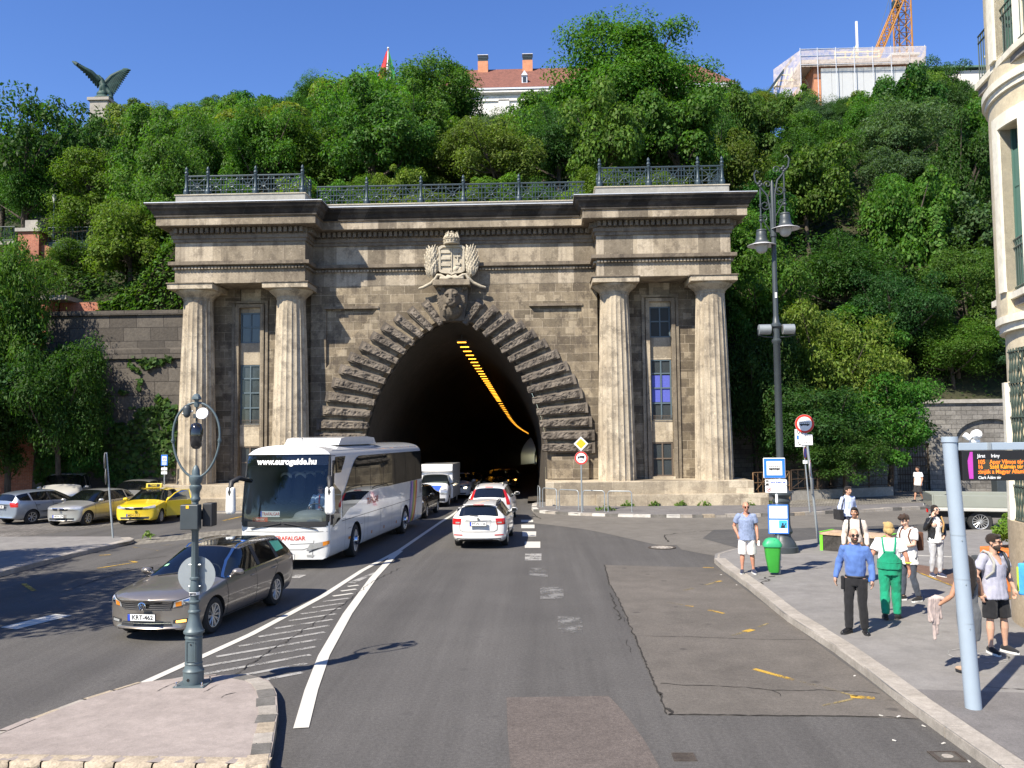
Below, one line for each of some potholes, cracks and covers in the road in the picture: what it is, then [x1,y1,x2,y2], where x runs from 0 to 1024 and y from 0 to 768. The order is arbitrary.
manhole cover [927,751,968,762]
manhole cover [671,752,697,761]
